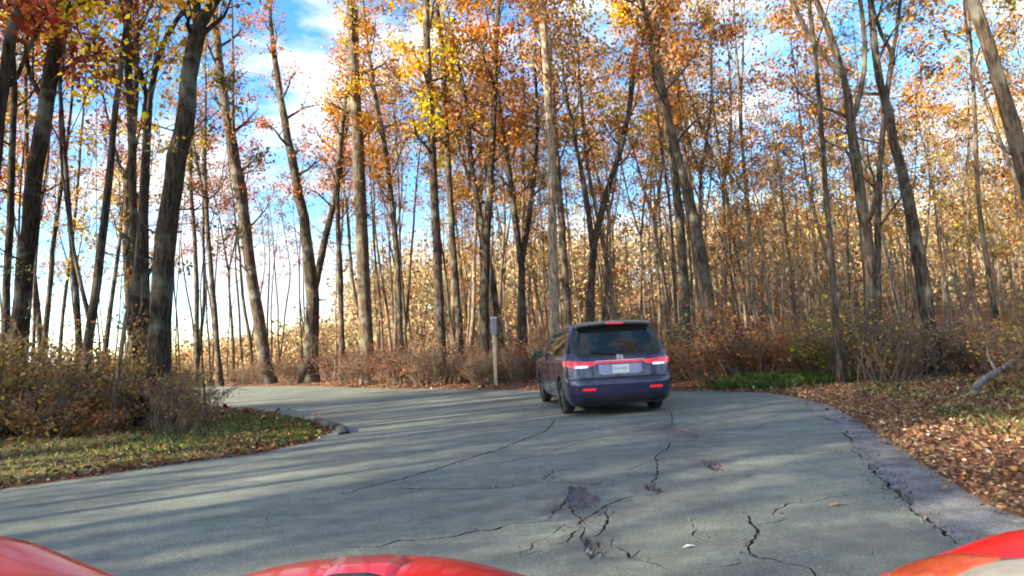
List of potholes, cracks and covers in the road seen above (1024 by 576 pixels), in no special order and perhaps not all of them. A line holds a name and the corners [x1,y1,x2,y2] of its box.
pothole [582,538,606,559]
crack [348,418,669,570]
pothole [566,486,602,511]
crack [628,411,673,483]
crack [691,487,849,576]
